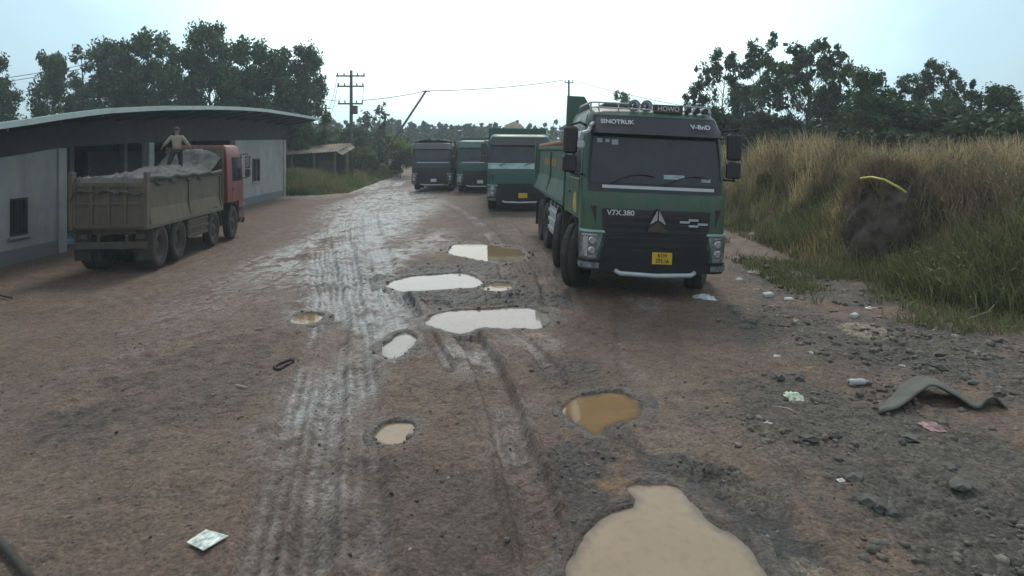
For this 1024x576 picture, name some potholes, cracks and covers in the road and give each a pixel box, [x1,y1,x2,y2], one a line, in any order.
pothole [370,328,426,363]
pothole [528,470,799,576]
pothole [473,280,520,293]
pothole [549,385,660,440]
pothole [362,418,424,447]
pothole [371,270,491,294]
pothole [280,310,335,329]
pothole [416,303,563,342]
pothole [440,241,534,266]
